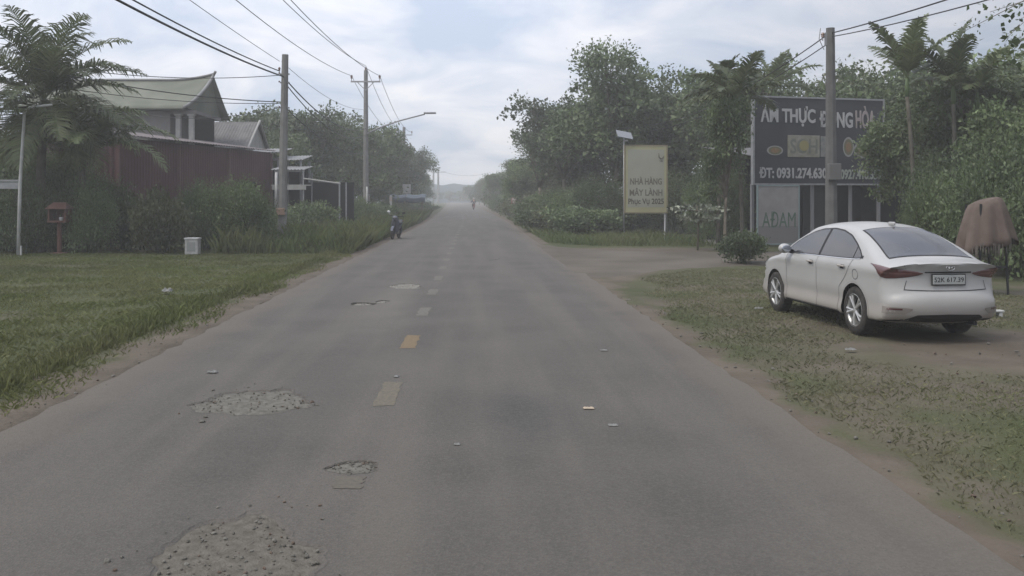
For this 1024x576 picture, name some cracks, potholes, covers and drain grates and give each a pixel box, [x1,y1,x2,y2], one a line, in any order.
pothole [144,508,330,576]
pothole [184,388,316,416]
pothole [322,460,378,475]
